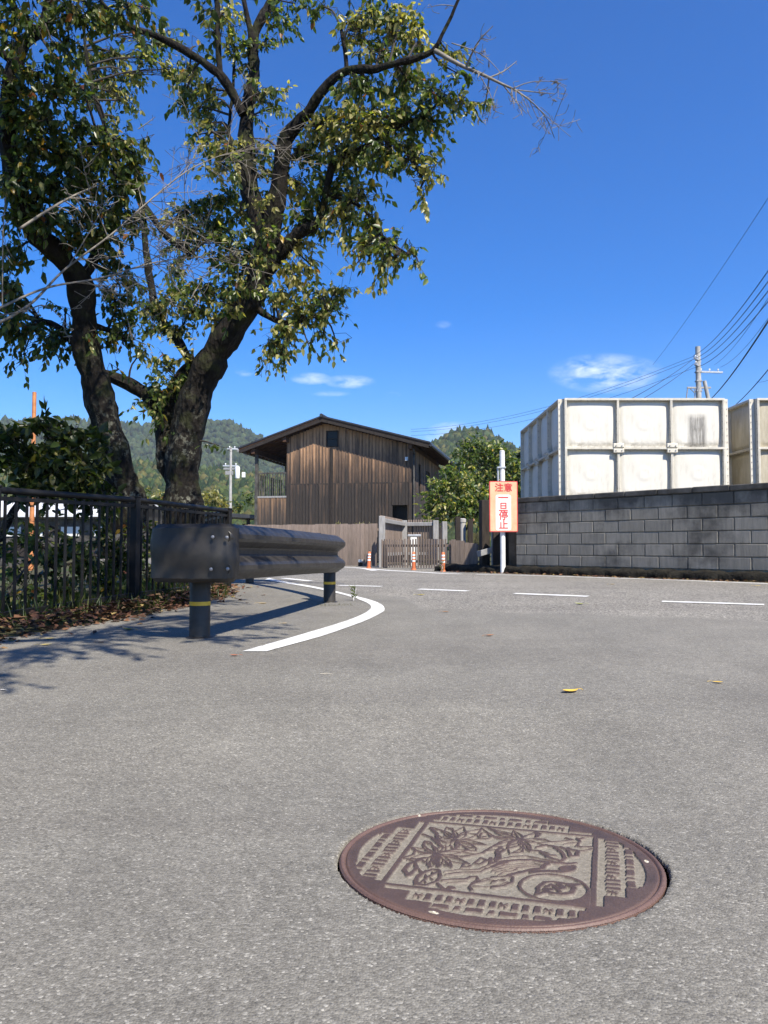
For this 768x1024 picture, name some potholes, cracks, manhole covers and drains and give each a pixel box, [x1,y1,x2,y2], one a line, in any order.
manhole cover [339,810,667,934]
